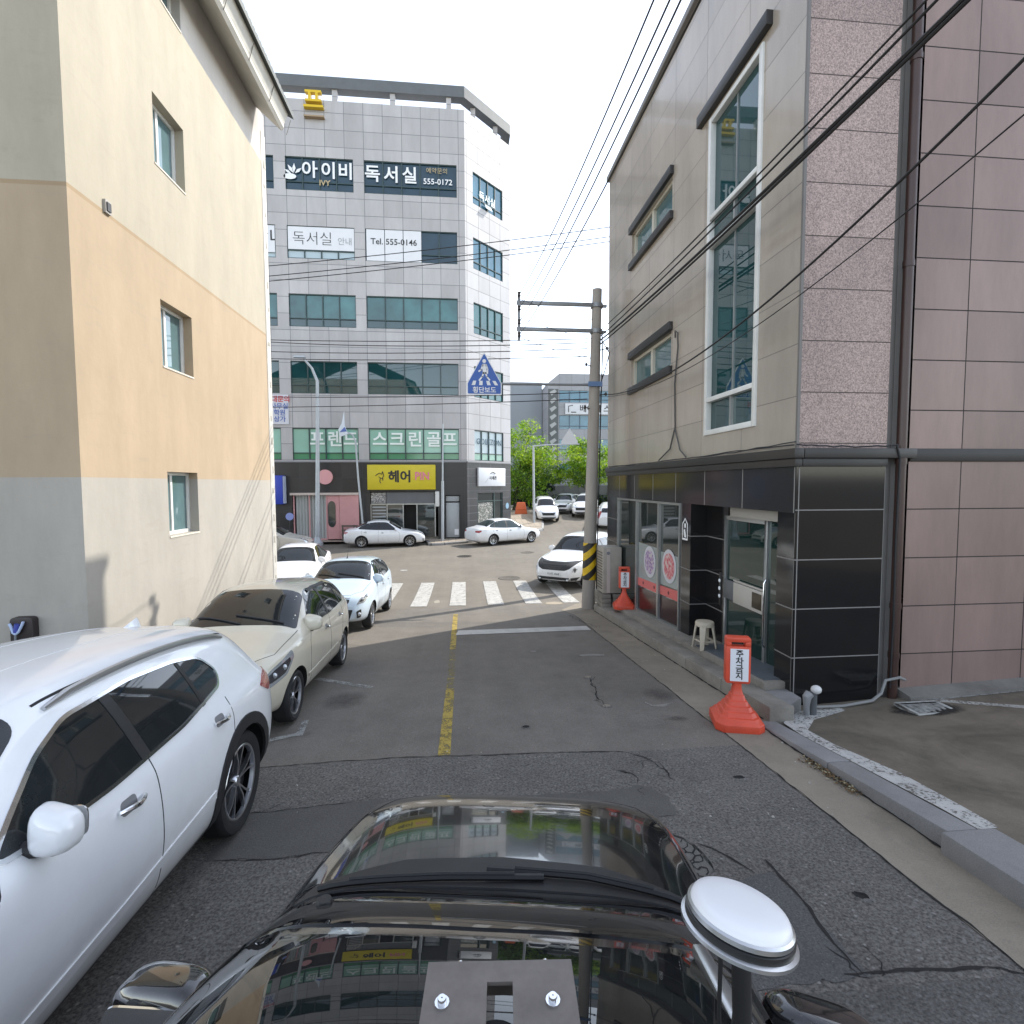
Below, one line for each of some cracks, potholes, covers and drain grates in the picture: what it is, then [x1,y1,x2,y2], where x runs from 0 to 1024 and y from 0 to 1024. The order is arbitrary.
crack [570,615,1024,978]
pothole [847,891,874,902]
